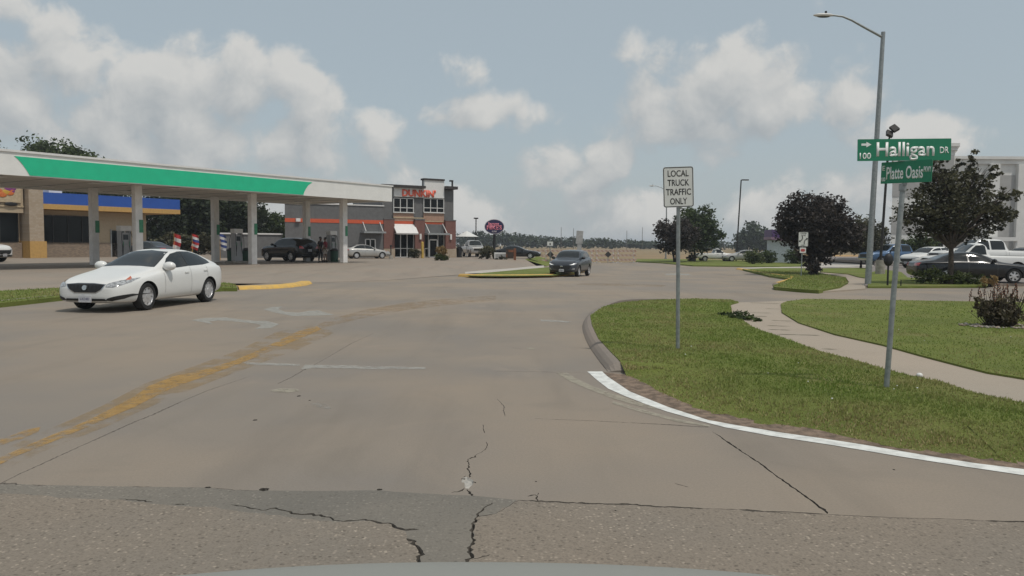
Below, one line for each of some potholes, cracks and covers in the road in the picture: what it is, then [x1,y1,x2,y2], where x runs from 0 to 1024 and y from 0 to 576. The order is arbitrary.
crack [452,399,1024,562]
crack [126,499,425,562]
